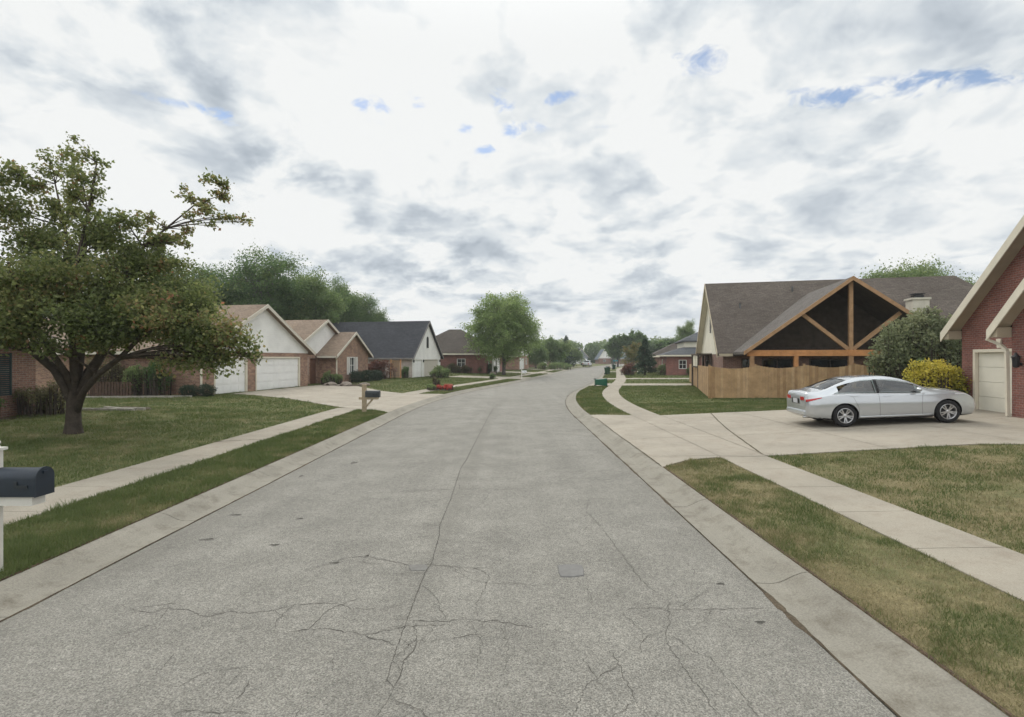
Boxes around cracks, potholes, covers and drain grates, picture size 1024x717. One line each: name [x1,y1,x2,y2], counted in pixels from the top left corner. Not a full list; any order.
crack [121,409,548,717]
